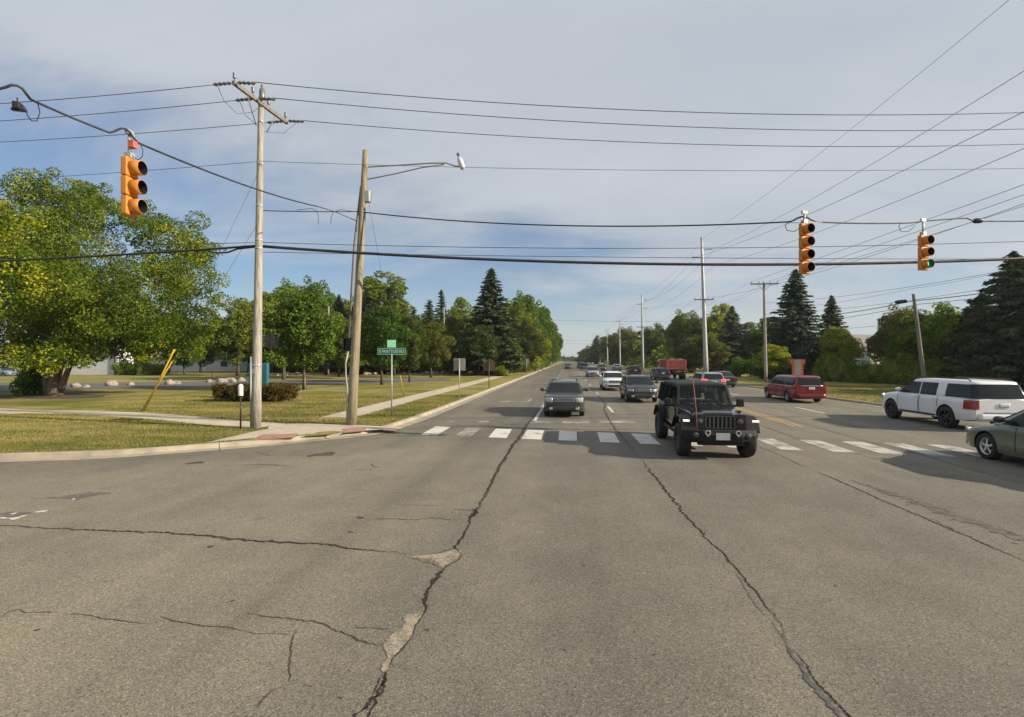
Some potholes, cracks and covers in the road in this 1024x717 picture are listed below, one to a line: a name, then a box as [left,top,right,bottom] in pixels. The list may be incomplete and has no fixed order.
crack [0,525,403,554]
crack [587,383,852,717]
crack [163,424,527,717]
crack [1,609,140,623]
crack [760,447,1024,561]
